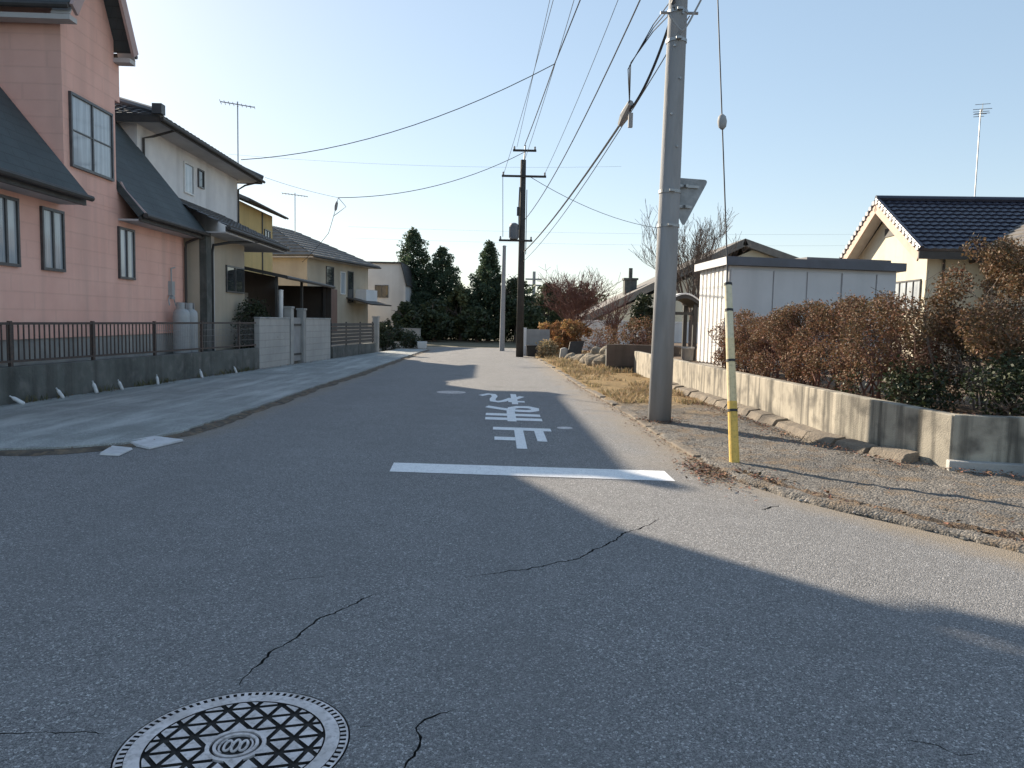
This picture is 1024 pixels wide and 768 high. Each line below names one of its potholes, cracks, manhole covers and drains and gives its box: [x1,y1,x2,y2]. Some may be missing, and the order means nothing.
crack [239,591,383,687]
manhole cover [111,691,350,768]
crack [466,518,659,578]
crack [404,710,451,768]
